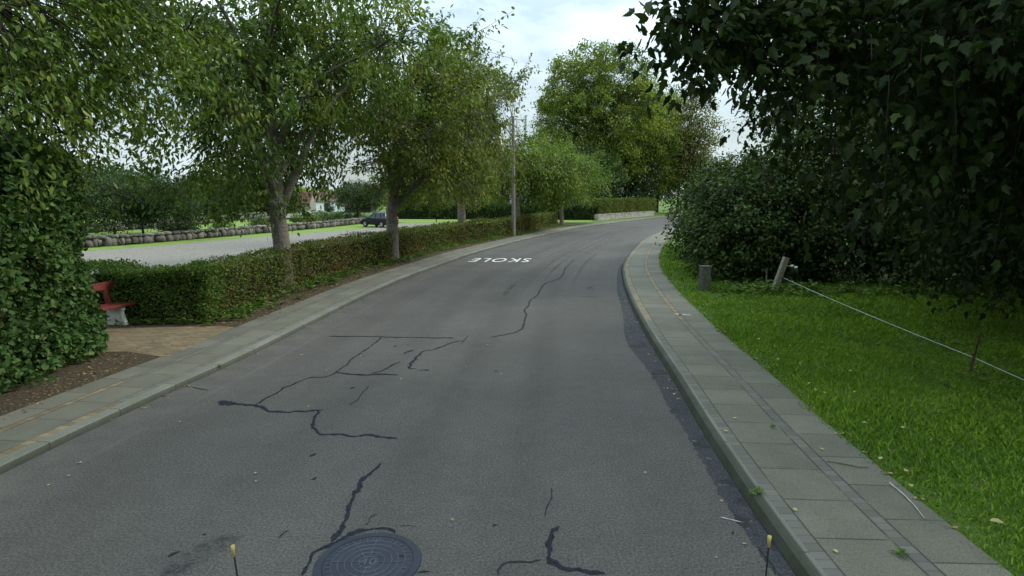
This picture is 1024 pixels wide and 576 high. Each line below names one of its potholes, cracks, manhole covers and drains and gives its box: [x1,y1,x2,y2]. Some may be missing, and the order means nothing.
crack [497,559,541,574]
manhole cover [313,532,422,576]
